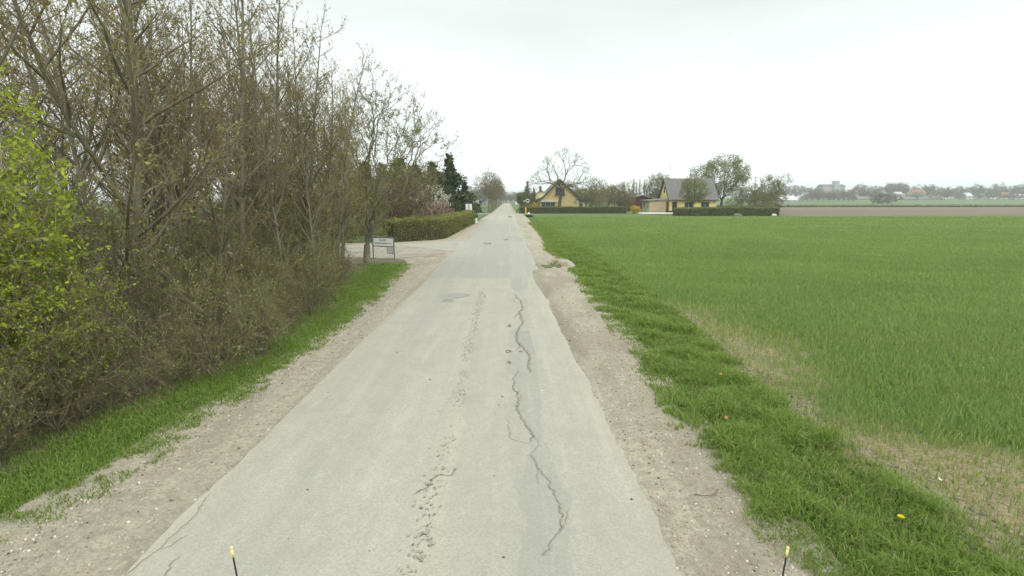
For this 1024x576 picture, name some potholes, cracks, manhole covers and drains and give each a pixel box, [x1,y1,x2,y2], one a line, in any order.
crack [507,295,568,555]
crack [125,497,206,576]
